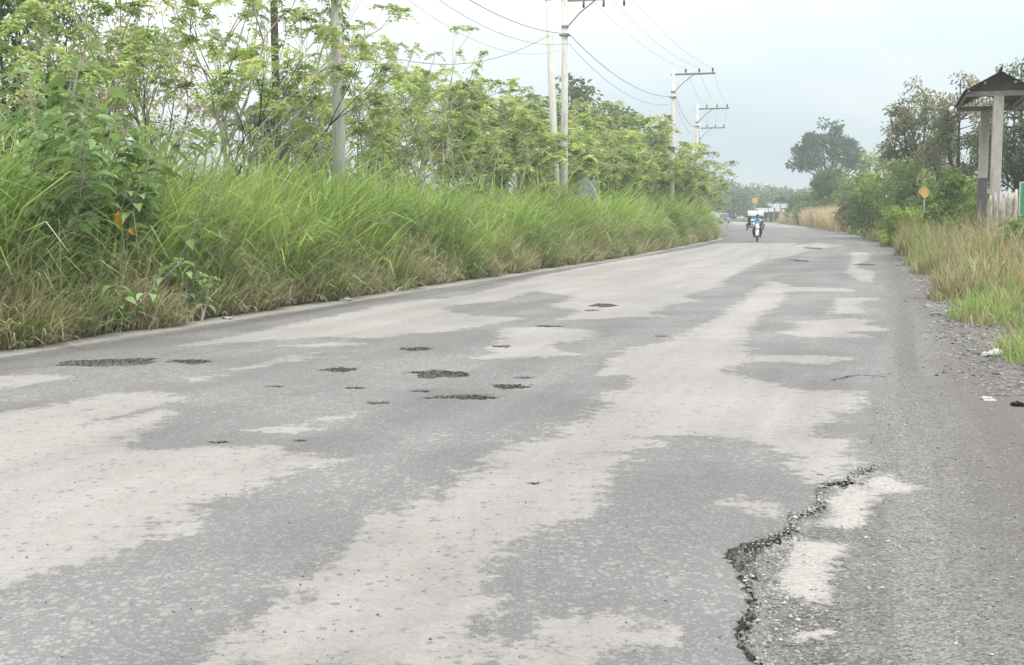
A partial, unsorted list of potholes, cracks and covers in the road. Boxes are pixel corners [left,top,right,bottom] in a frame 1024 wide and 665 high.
pothole [48,356,168,368]
crack [819,373,907,382]
pothole [399,368,477,380]
pothole [419,392,504,401]
pothole [308,365,364,373]
pothole [487,381,537,391]
